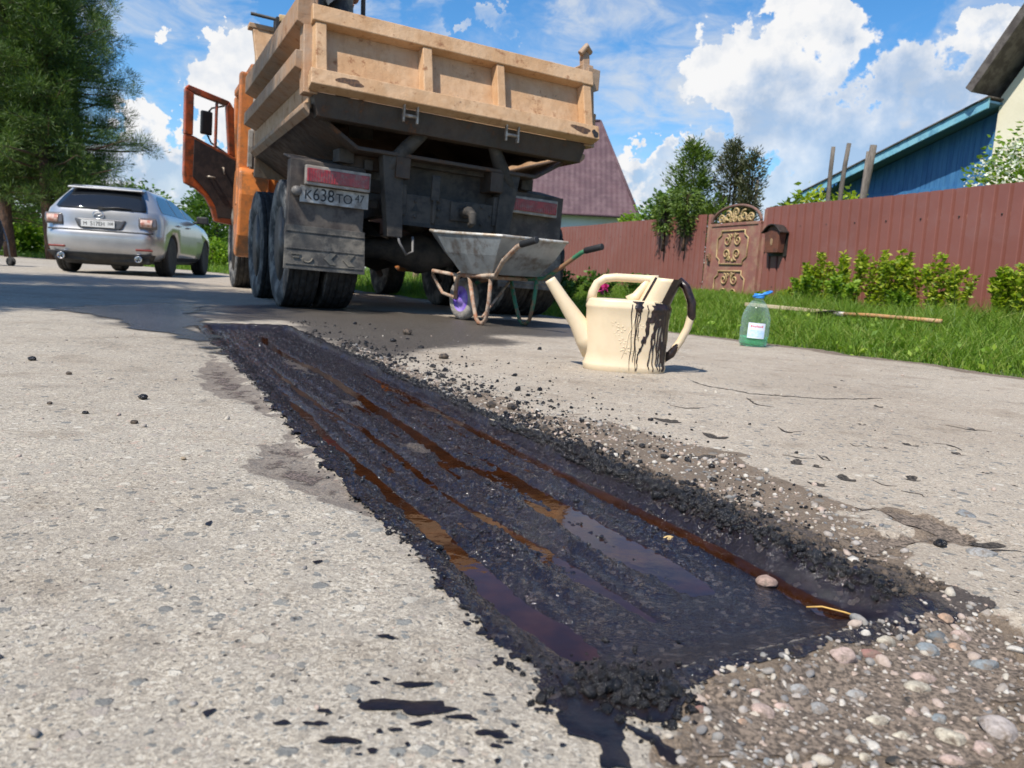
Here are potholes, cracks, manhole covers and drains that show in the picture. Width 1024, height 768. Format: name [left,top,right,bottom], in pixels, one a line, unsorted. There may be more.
crack [693,381,883,407]
